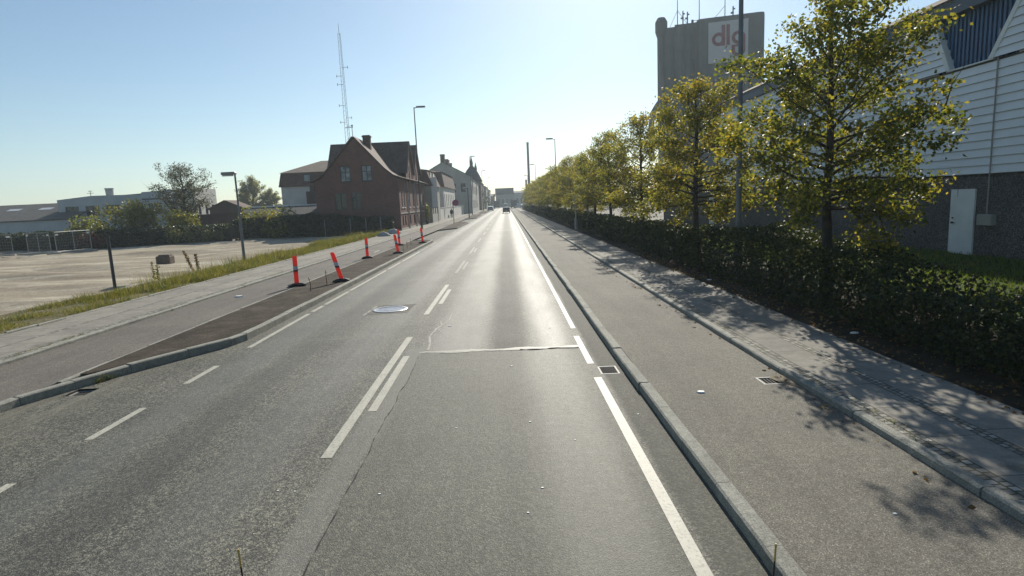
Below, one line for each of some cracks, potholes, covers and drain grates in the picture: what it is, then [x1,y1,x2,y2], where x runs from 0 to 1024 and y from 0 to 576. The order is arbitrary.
crack [385,304,573,354]
drain grate [597,366,620,374]
drain grate [756,377,783,385]
drain grate [65,388,99,396]
